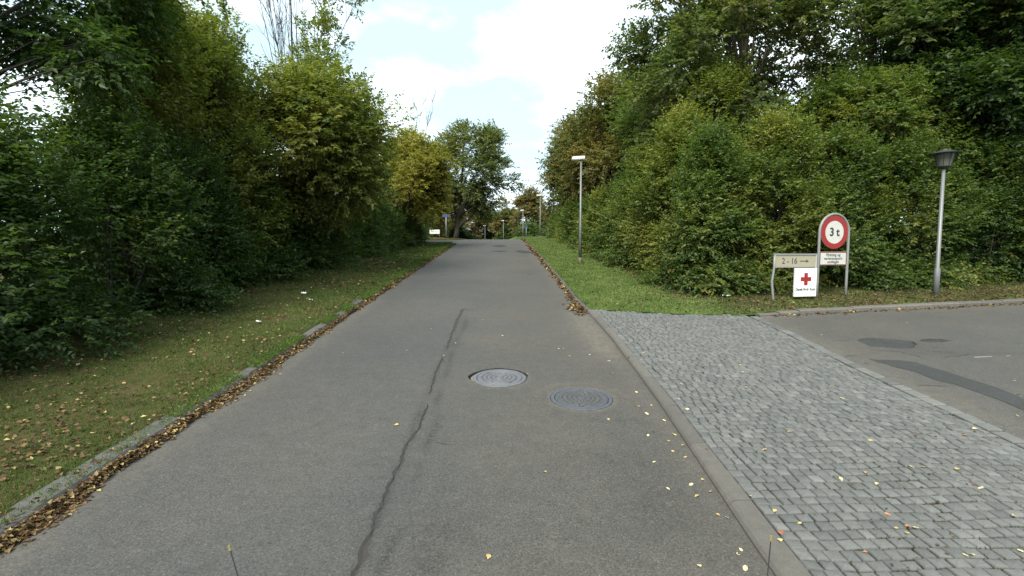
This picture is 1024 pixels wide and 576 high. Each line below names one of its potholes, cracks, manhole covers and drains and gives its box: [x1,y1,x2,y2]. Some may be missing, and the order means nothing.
manhole cover [550,387,613,411]
crack [350,309,464,576]
manhole cover [471,369,526,387]
